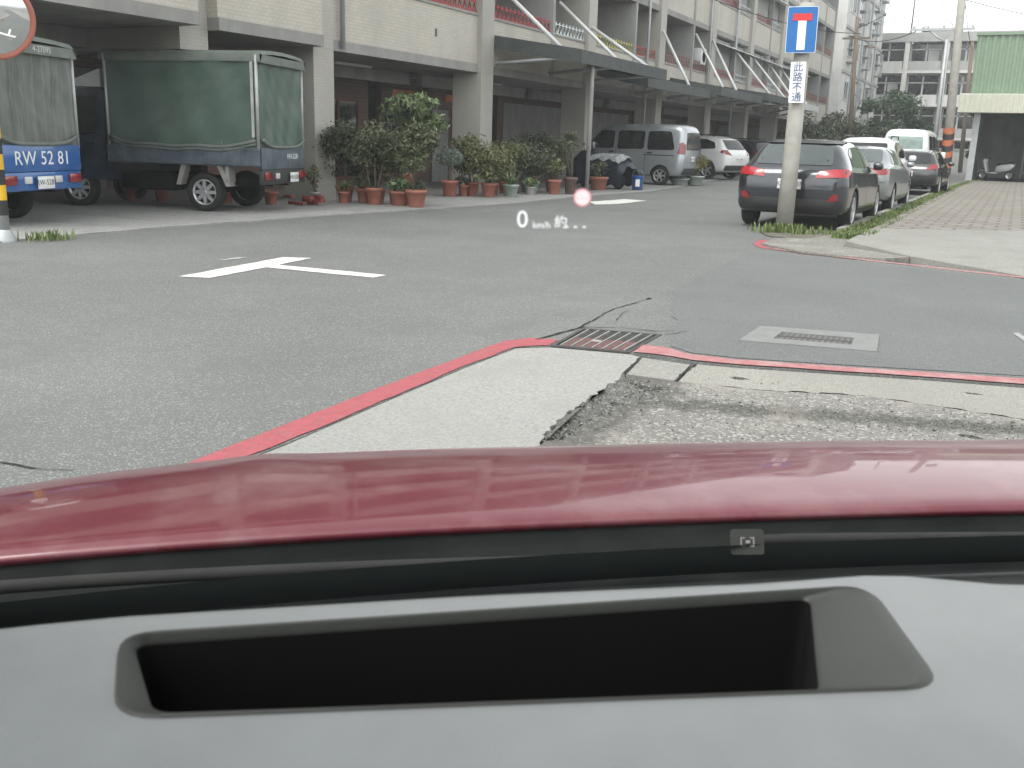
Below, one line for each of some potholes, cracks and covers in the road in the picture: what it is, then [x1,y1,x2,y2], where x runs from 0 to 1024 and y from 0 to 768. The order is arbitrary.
crack [539,299,686,339]
drain grate [551,328,662,354]
pothole [544,377,675,441]
crack [0,461,70,470]
manhole cover [739,326,880,352]
